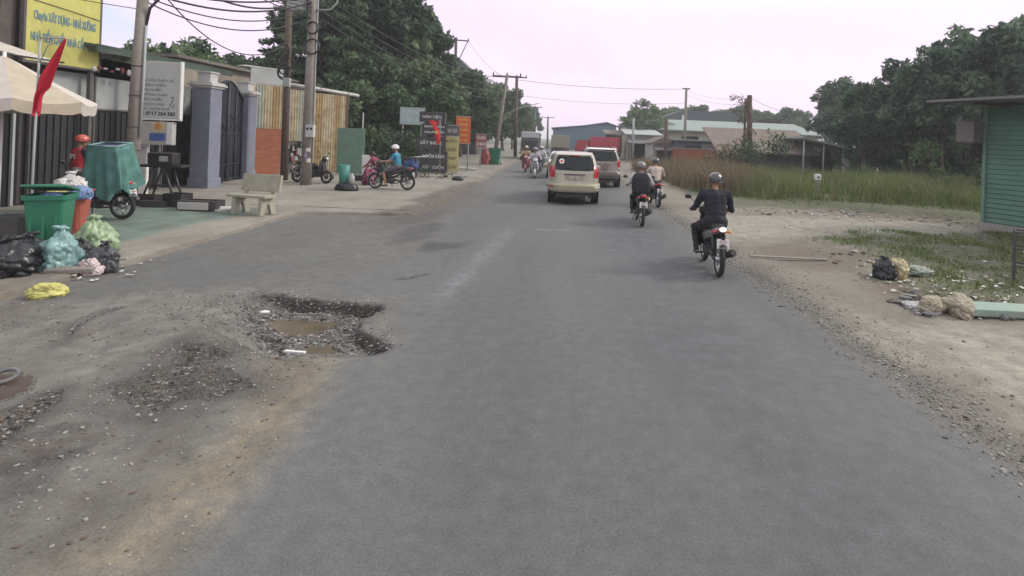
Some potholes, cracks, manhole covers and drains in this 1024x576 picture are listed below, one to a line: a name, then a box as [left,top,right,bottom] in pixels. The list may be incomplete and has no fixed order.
pothole [200,293,394,359]
pothole [0,387,68,445]
pothole [111,341,257,416]
